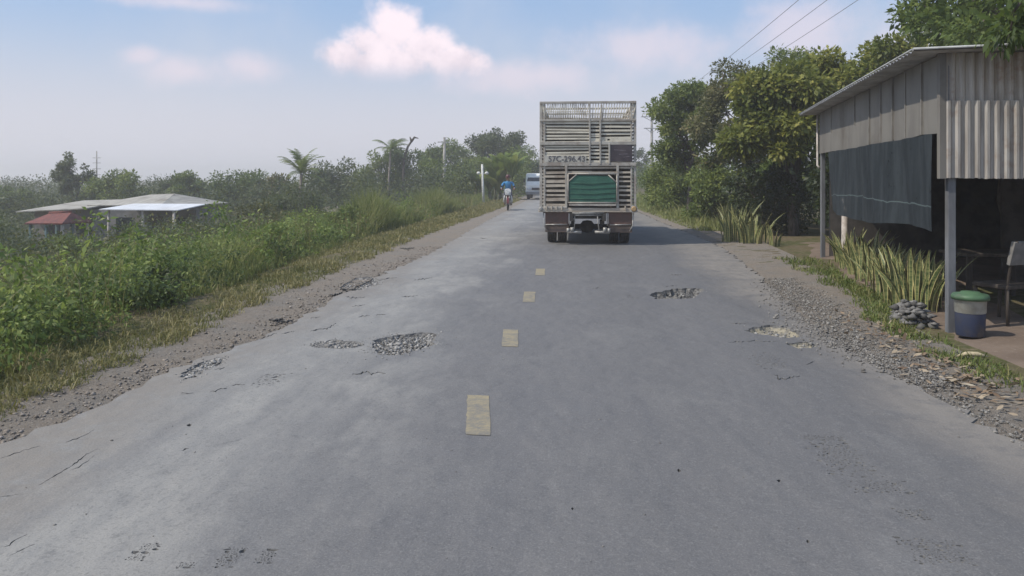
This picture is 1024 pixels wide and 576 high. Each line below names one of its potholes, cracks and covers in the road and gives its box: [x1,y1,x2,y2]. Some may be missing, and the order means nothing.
pothole [343,330,457,363]
pothole [744,325,803,338]
pothole [340,276,394,292]
pothole [650,288,708,302]
crack [213,367,293,392]
pothole [304,338,369,350]
crack [38,430,93,486]
pothole [787,341,817,349]
pothole [174,356,231,383]
